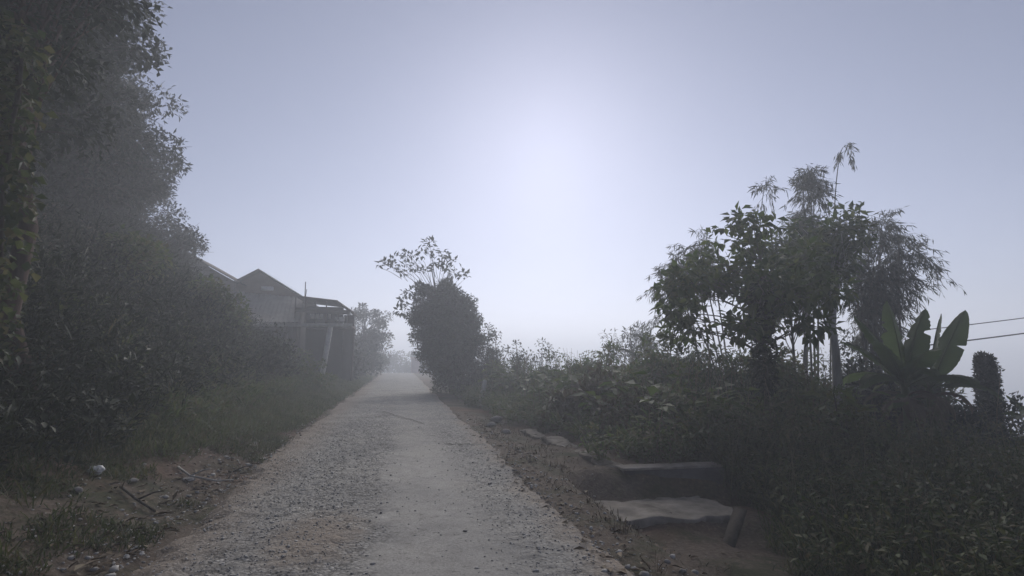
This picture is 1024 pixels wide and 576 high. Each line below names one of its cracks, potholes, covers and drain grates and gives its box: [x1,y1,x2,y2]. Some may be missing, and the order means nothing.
crack [375,411,424,424]
